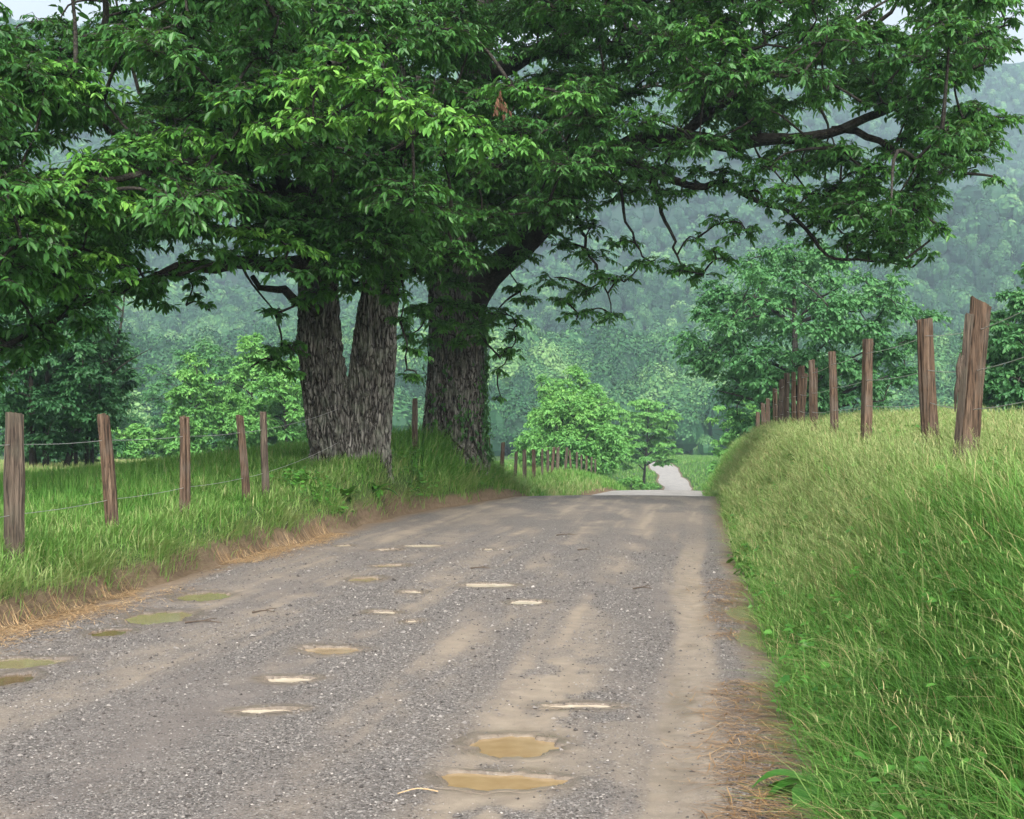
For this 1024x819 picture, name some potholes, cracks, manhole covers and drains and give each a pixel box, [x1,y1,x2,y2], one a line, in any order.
pothole [447,731,581,762]
pothole [81,627,140,638]
pothole [253,675,327,683]
pothole [0,654,98,671]
pothole [287,644,373,656]
pothole [413,766,597,795]
pothole [220,705,314,714]
pothole [0,668,48,689]
pothole [162,589,244,603]
pothole [103,608,211,627]
pothole [340,575,390,583]
